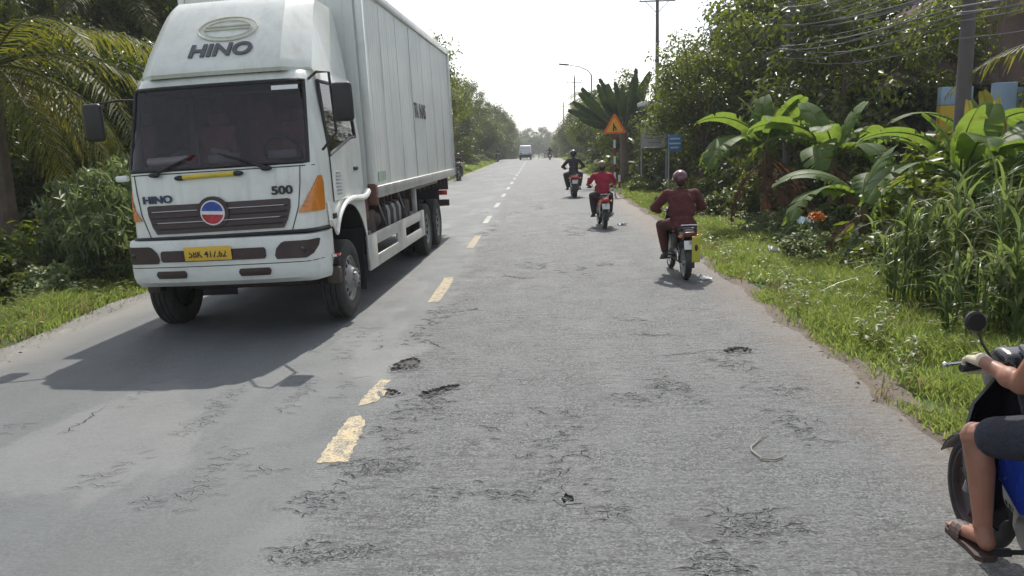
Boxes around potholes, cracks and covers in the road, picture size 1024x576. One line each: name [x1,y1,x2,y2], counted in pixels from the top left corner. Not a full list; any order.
crack [0,381,635,524]
crack [601,313,840,446]
pothole [377,387,406,397]
crack [260,539,389,567]
pothole [553,489,584,506]
pothole [719,346,756,354]
pothole [387,356,425,373]
crack [669,505,825,576]
pothole [413,383,463,401]
